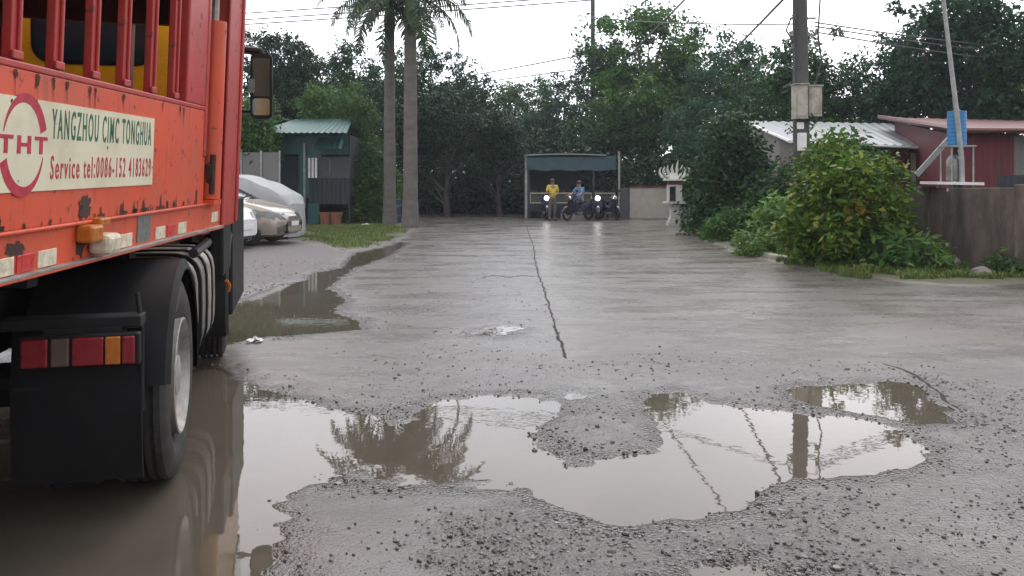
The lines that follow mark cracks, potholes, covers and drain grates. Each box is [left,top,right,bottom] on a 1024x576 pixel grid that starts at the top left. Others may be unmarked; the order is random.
pothole [769,374,985,429]
crack [882,363,963,412]
pothole [518,383,959,537]
crack [482,224,567,358]
pothole [275,388,595,497]
